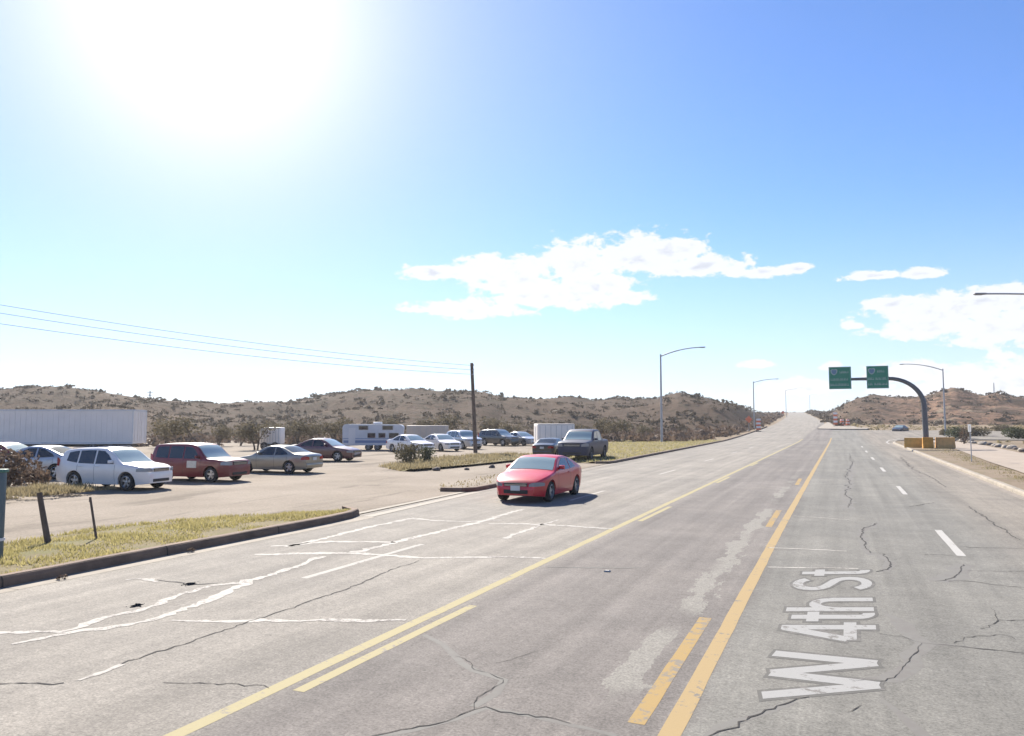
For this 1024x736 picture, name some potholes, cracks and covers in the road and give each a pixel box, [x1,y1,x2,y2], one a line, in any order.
crack [803,454,929,572]
crack [372,634,618,736]
